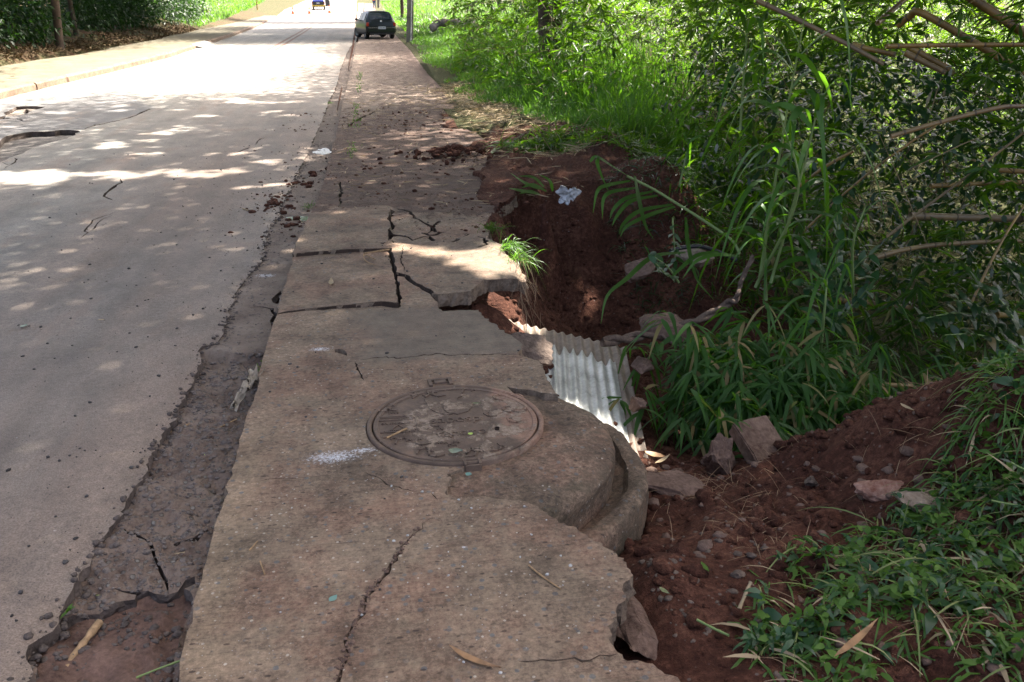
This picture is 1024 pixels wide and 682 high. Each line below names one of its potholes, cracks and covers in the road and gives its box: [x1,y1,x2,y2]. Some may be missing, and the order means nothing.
manhole cover [367,377,544,472]
crack [333,524,423,682]
crack [381,209,488,307]
pothole [34,591,192,682]
crack [118,529,207,596]
